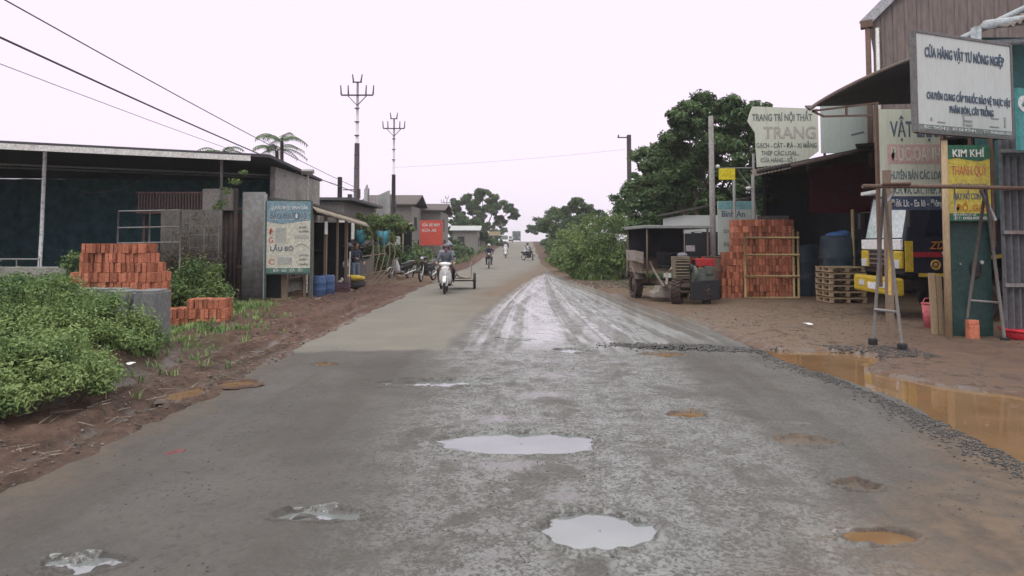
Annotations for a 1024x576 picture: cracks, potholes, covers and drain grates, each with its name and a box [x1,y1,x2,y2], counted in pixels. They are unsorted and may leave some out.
pothole [662,407,715,419]
pothole [829,525,930,548]
pothole [24,549,138,576]
pothole [212,378,265,389]
pothole [519,506,683,559]
pothole [354,376,521,389]
pothole [766,433,846,449]
pothole [153,385,210,404]
pothole [826,475,888,493]
pothole [409,427,619,459]
pothole [259,502,382,524]
